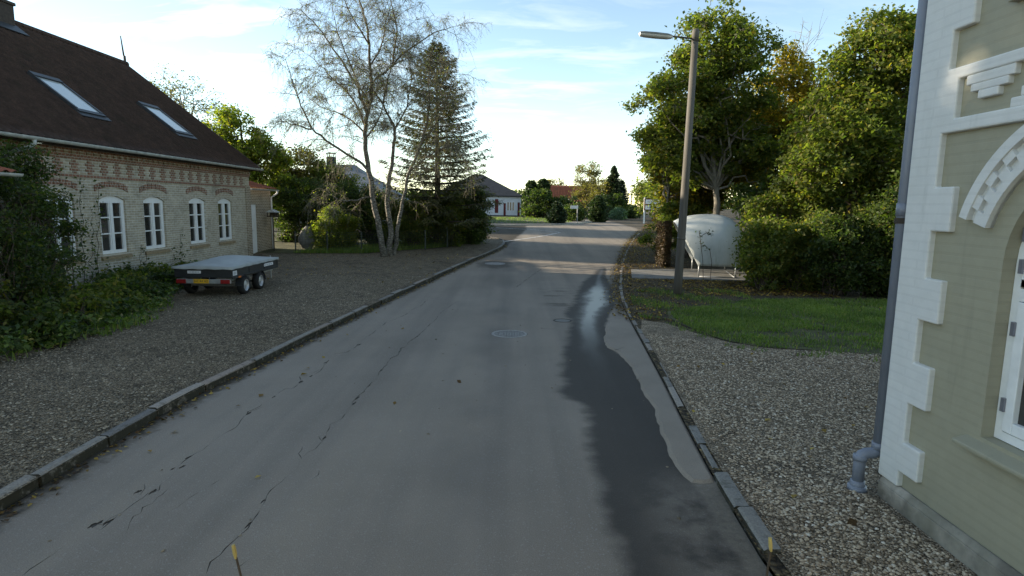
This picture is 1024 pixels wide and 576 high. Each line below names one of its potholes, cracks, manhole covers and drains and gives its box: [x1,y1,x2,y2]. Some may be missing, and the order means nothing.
crack [88,297,438,533]
manhole cover [491,330,527,338]
